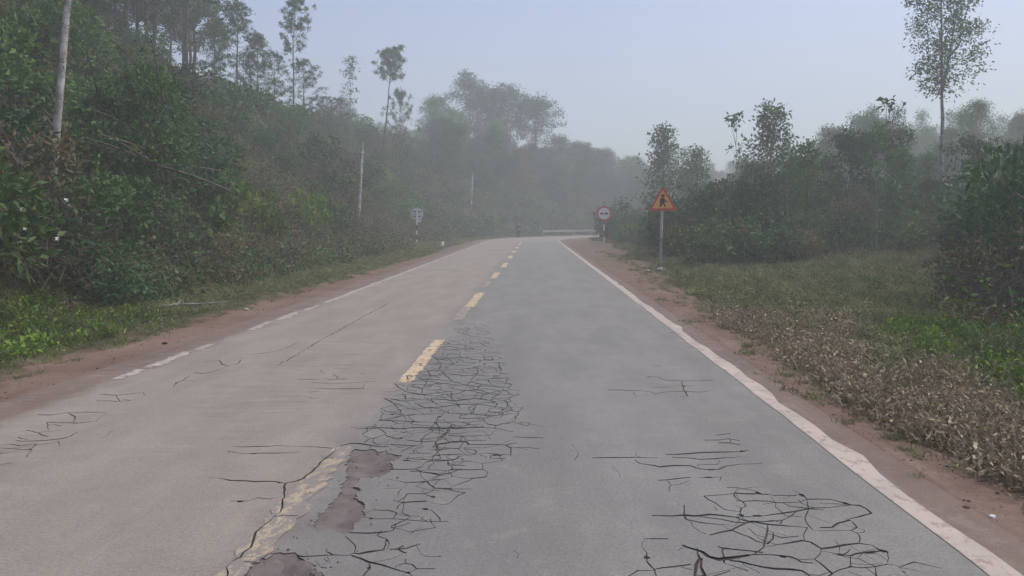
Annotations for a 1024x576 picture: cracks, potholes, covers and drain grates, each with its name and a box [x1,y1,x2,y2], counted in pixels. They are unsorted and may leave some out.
crack [173,303,388,387]
crack [320,322,542,576]
crack [596,433,939,576]
crack [305,354,375,398]
crack [0,392,145,465]
crack [627,363,712,396]
pothole [244,548,359,576]
pothole [292,446,409,539]
